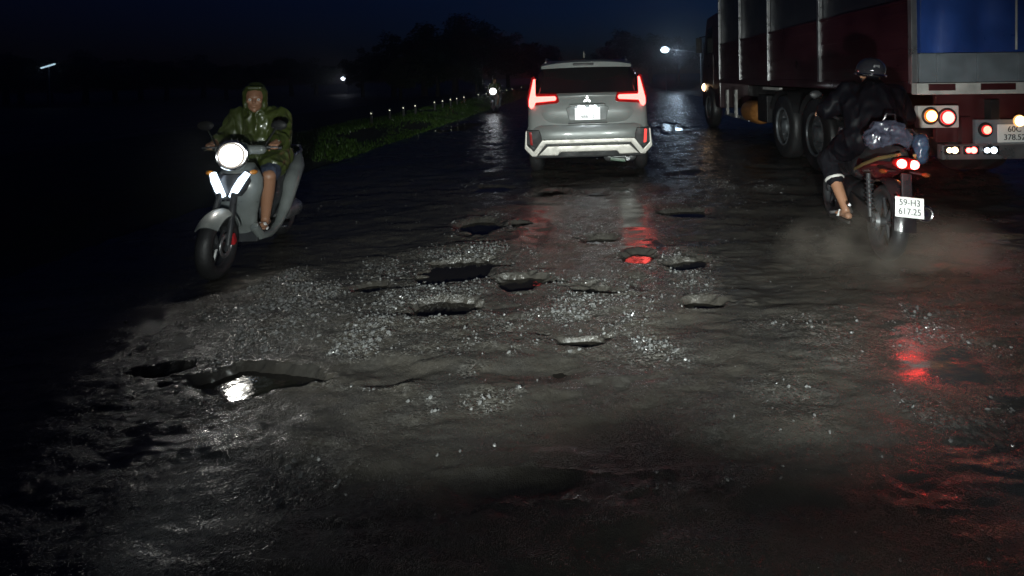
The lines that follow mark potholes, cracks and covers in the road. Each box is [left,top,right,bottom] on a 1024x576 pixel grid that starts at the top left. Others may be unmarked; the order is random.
pothole [617,247,662,265]
pothole [124,360,328,403]
pothole [656,253,713,270]
pothole [487,269,561,294]
pothole [444,216,511,242]
pothole [398,254,511,285]
pothole [348,279,393,293]
pothole [680,294,754,308]
pothole [570,232,624,244]
pothole [551,278,634,294]
pothole [655,207,741,218]
